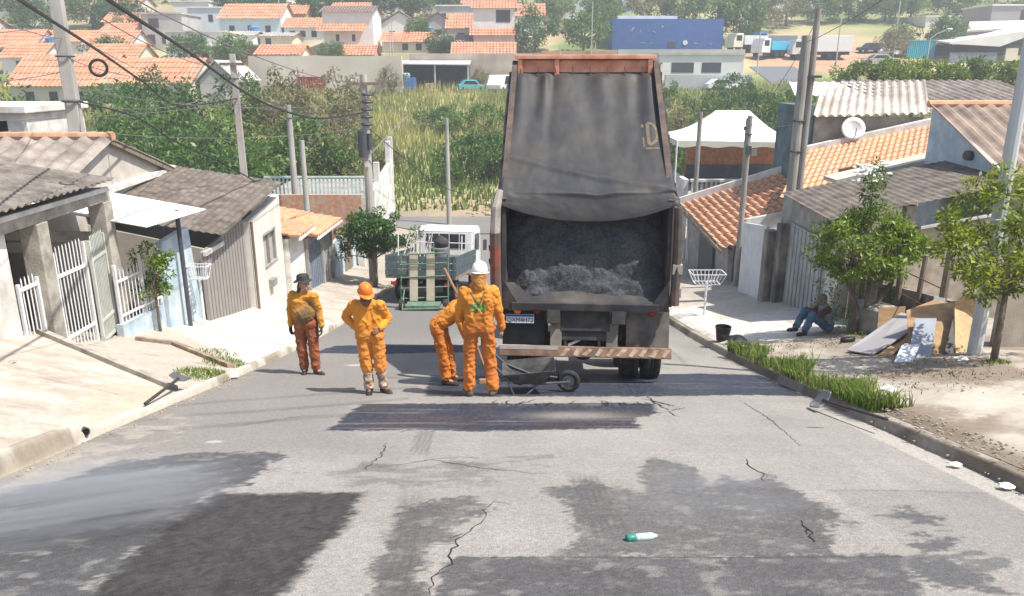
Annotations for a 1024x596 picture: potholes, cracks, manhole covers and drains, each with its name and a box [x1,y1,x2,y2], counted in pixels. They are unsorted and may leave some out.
crack [428,501,508,596]
crack [365,444,527,473]
